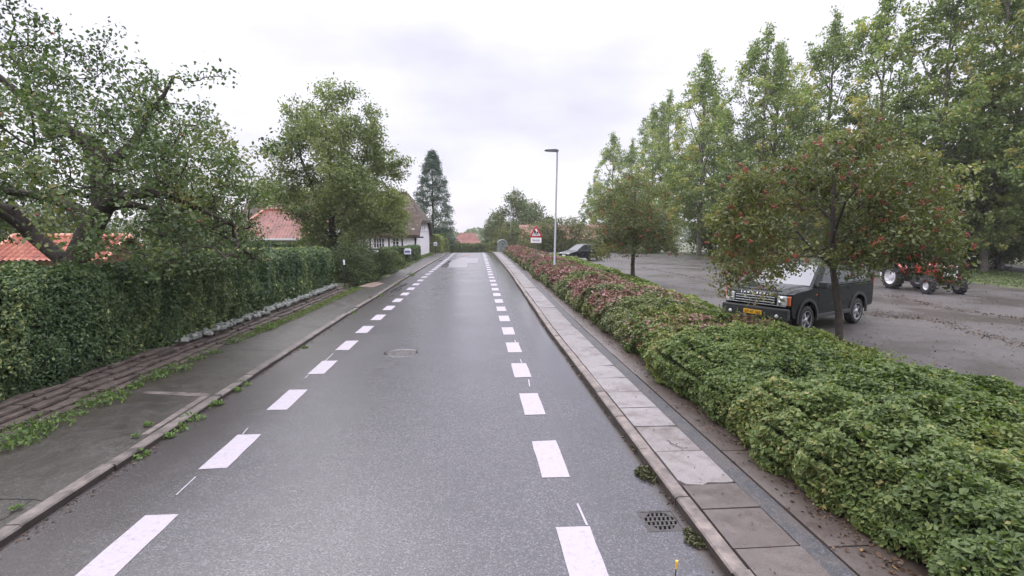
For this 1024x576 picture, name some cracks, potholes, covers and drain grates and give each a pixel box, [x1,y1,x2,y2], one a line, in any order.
drain grate [637,510,684,532]
manhole cover [384,349,420,357]
